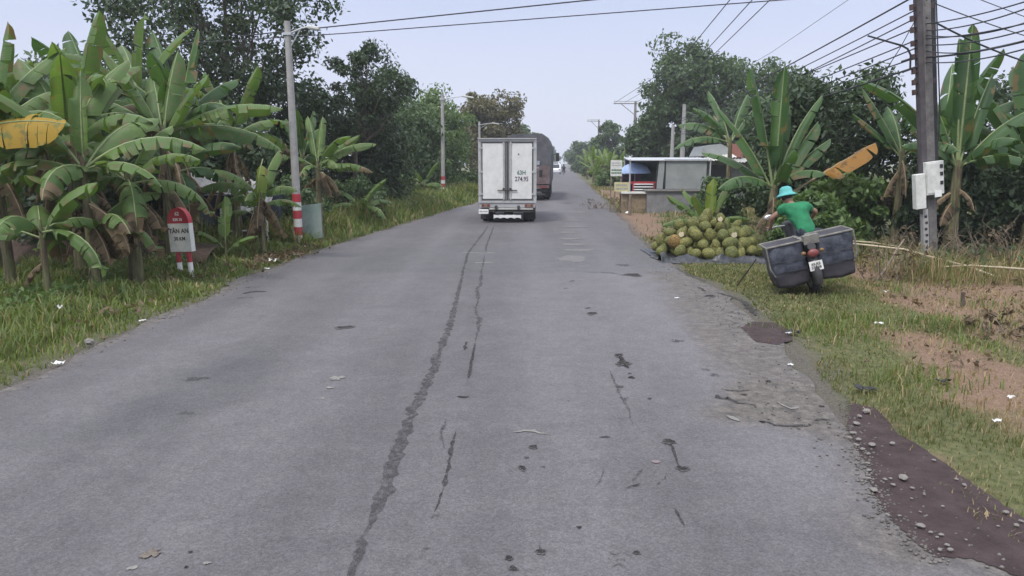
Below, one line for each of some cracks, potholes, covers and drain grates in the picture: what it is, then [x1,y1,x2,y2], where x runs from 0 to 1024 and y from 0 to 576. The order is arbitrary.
crack [347,228,493,576]
crack [627,444,680,488]
crack [715,388,829,427]
crack [610,353,634,426]
